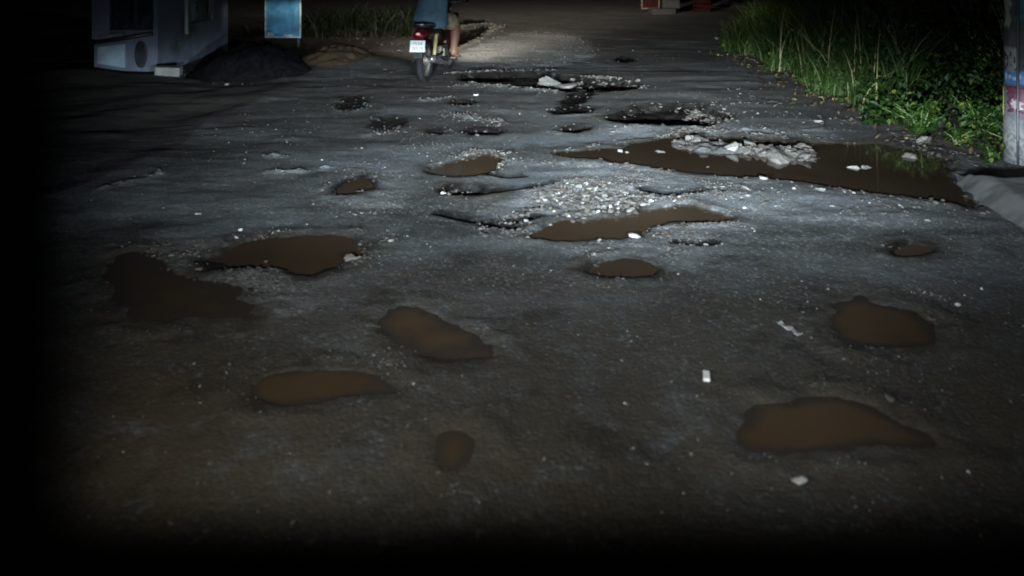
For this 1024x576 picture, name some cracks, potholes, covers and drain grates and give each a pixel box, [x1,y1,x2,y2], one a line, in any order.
pothole [549,131,984,210]
pothole [186,230,373,282]
pothole [358,297,514,371]
pothole [366,116,410,131]
pothole [334,96,372,111]
pothole [882,237,946,259]
pothole [324,174,380,196]
pothole [235,360,415,411]
pothole [421,151,511,177]
pothole [548,92,599,115]
pothole [523,198,744,244]
pothole [602,103,735,127]
